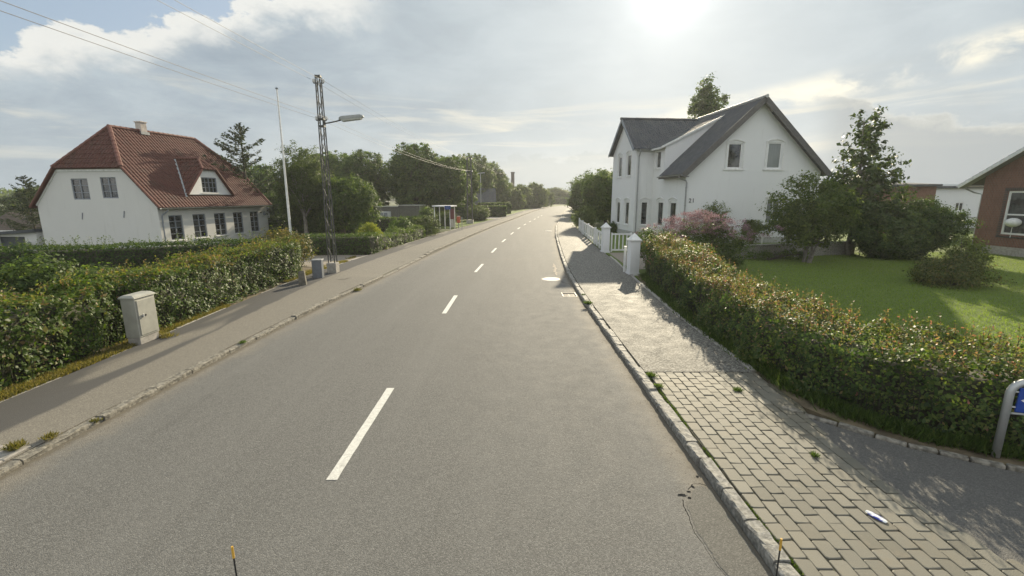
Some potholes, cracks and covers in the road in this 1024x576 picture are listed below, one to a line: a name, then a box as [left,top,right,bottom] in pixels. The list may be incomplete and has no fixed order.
crack [682,483,726,576]
